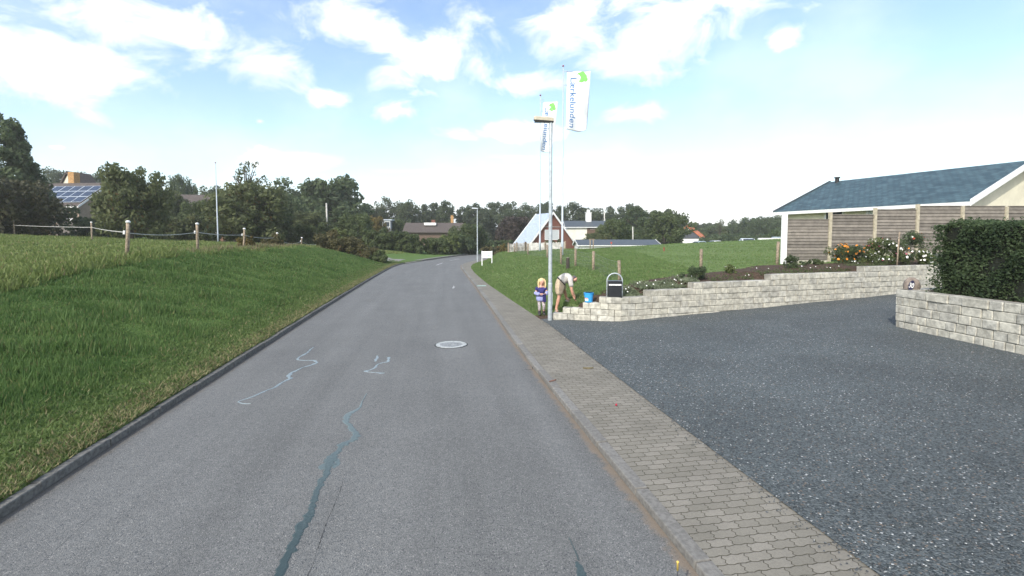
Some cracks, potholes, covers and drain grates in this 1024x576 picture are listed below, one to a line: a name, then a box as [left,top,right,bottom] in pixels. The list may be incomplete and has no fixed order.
manhole cover [434,341,468,349]
crack [307,481,343,576]
